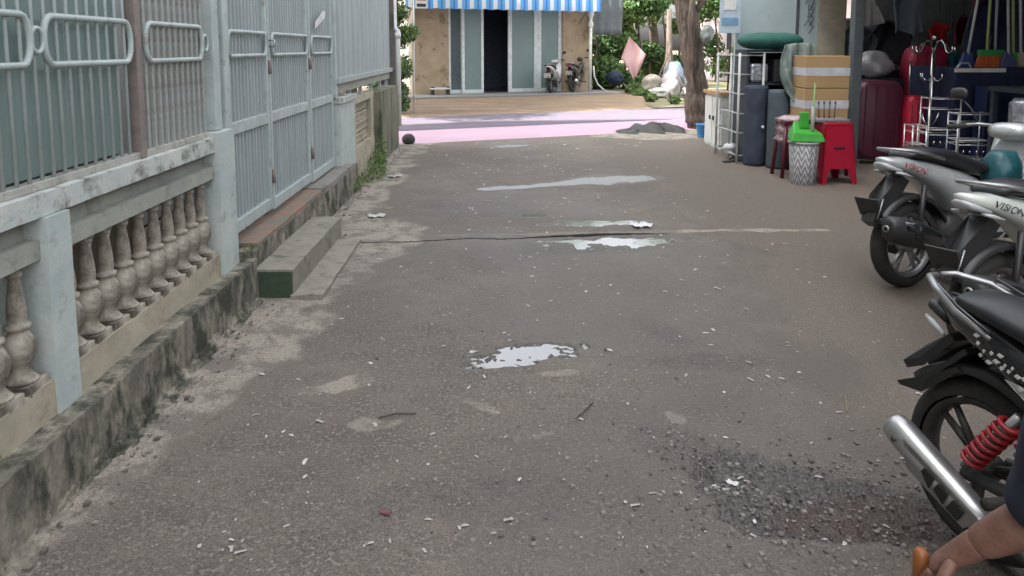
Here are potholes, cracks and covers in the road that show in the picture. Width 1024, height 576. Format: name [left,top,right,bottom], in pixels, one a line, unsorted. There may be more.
pothole [686,445,957,549]
pothole [458,339,591,370]
